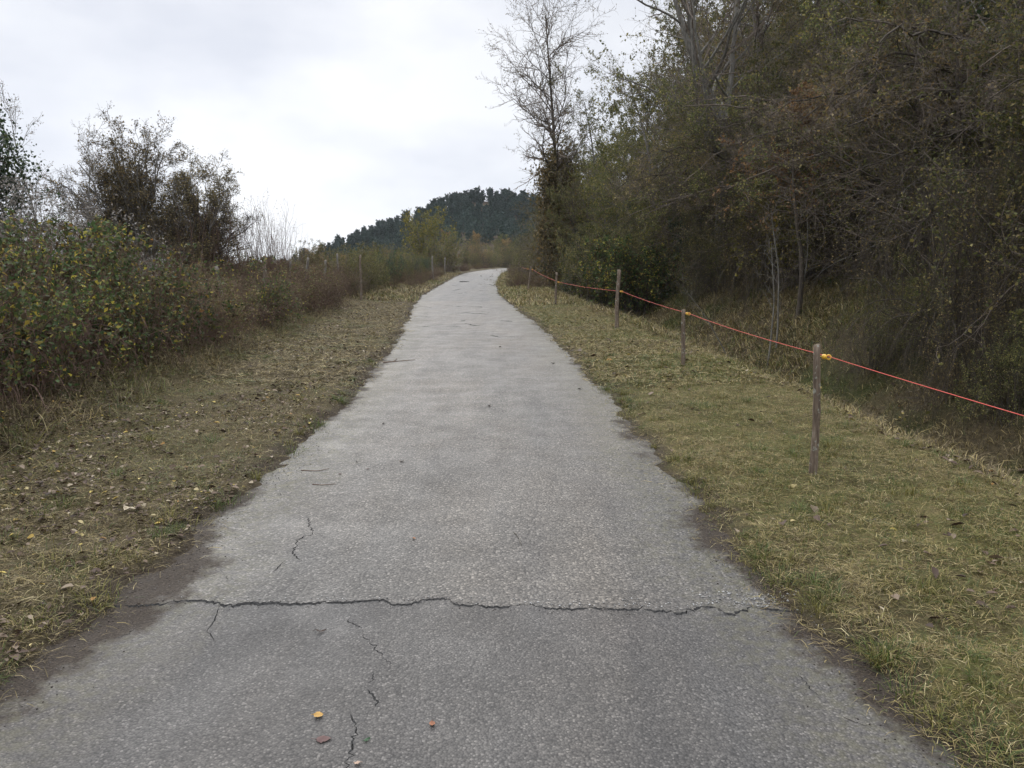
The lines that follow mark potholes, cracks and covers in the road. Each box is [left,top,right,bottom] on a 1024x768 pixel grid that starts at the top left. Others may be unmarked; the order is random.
crack [273,519,314,572]
crack [113,597,801,768]
